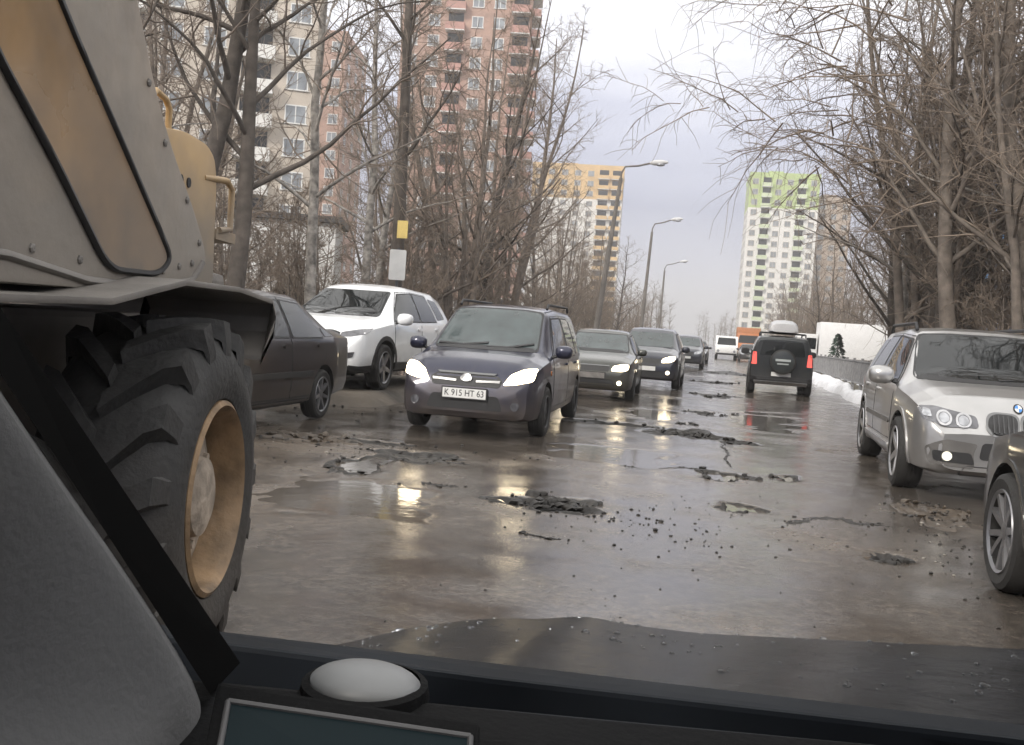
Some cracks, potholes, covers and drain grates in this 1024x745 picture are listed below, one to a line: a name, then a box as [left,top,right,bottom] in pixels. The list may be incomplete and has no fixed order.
pothole [694,466,763,482]
pothole [255,430,364,445]
pothole [322,452,407,475]
pothole [641,428,735,441]
pothole [366,448,466,465]
pothole [869,552,916,565]
pothole [768,473,798,482]
pothole [890,499,971,532]
pothole [714,502,770,514]
crack [783,515,889,527]
pothole [478,490,603,517]
crack [519,530,561,540]
